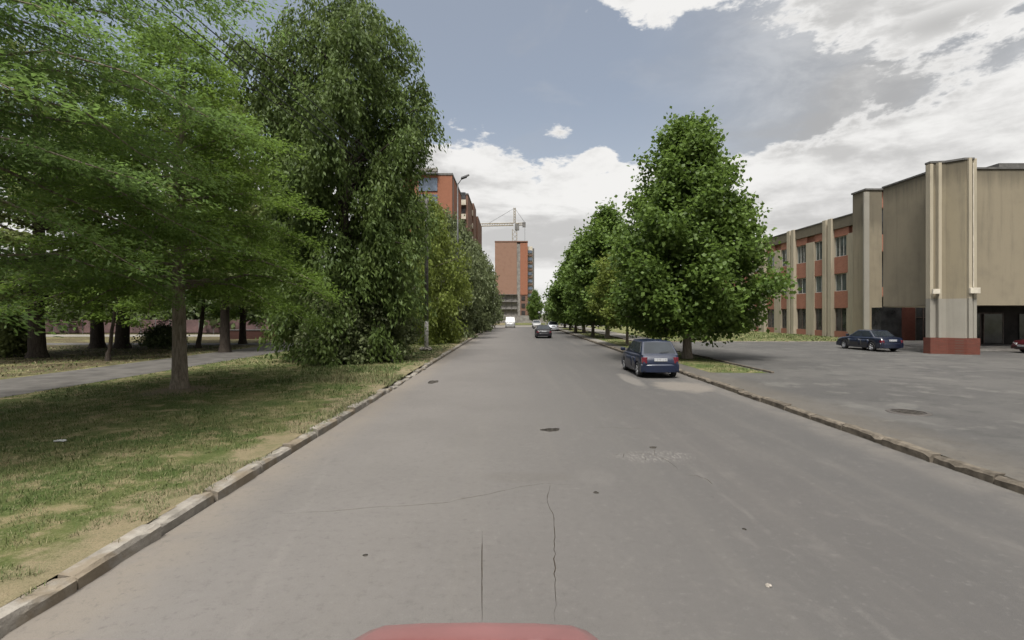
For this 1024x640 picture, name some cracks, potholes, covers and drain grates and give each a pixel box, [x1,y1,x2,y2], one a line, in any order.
crack [283,483,560,618]
